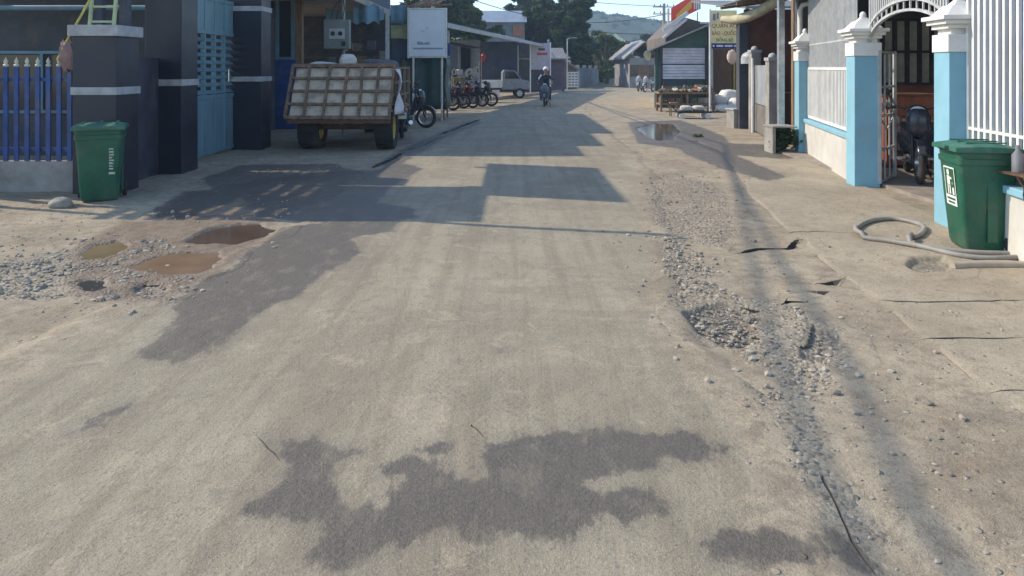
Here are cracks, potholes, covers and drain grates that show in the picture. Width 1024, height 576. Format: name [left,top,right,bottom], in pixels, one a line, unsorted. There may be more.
crack [705,226,1024,353]
crack [436,406,522,459]
crack [756,399,912,576]
crack [955,377,1024,410]
pothole [44,234,157,269]
pothole [656,295,813,362]
crack [220,418,320,485]
pothole [153,217,303,252]
pothole [97,244,253,286]
